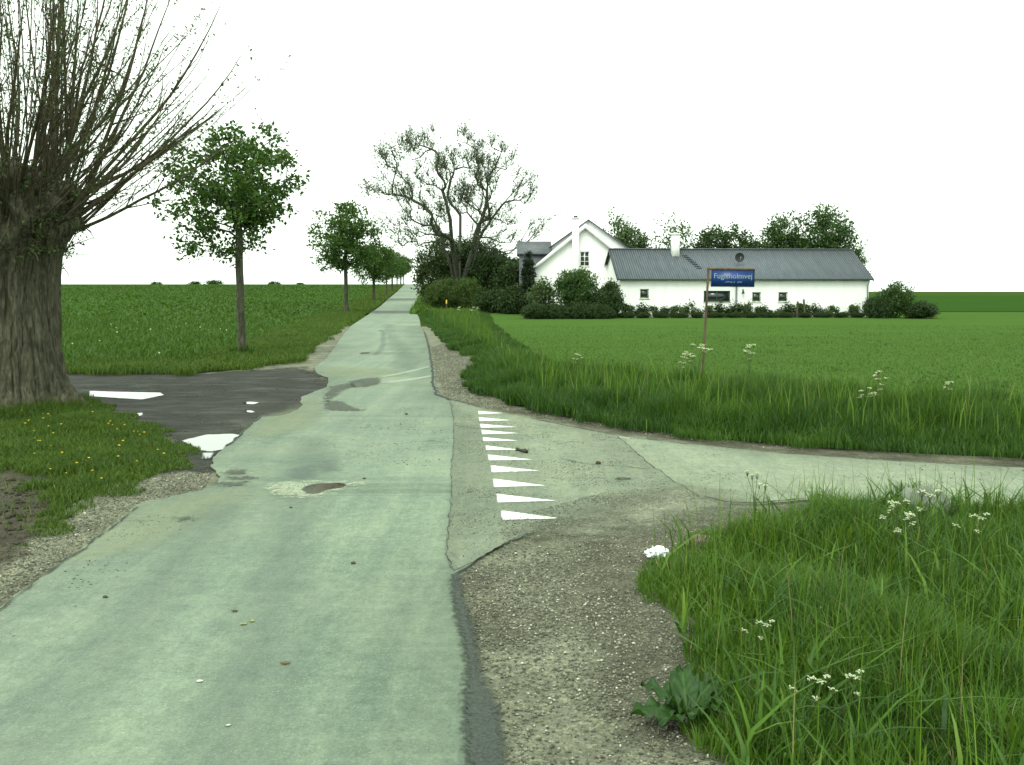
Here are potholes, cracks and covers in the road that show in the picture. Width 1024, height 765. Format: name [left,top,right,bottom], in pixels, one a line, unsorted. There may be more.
pothole [303,484,346,494]
